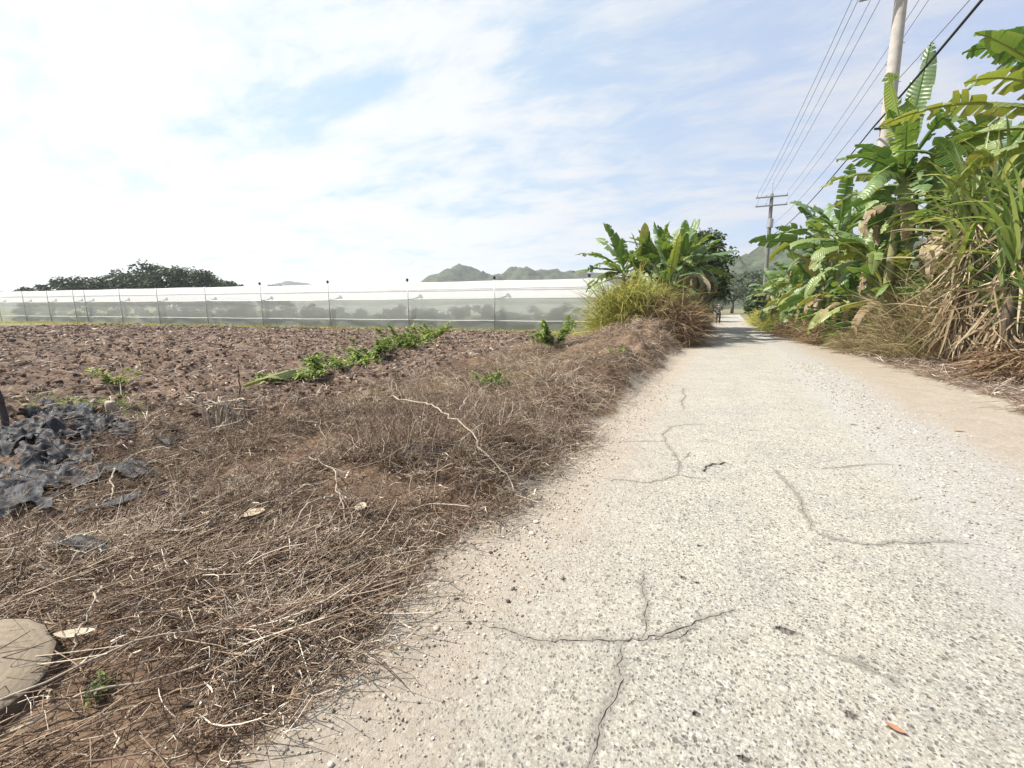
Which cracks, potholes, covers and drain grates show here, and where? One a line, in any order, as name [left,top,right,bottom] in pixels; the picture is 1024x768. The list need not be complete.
crack [481,574,736,767]
crack [604,424,726,483]
crack [774,469,1005,549]
